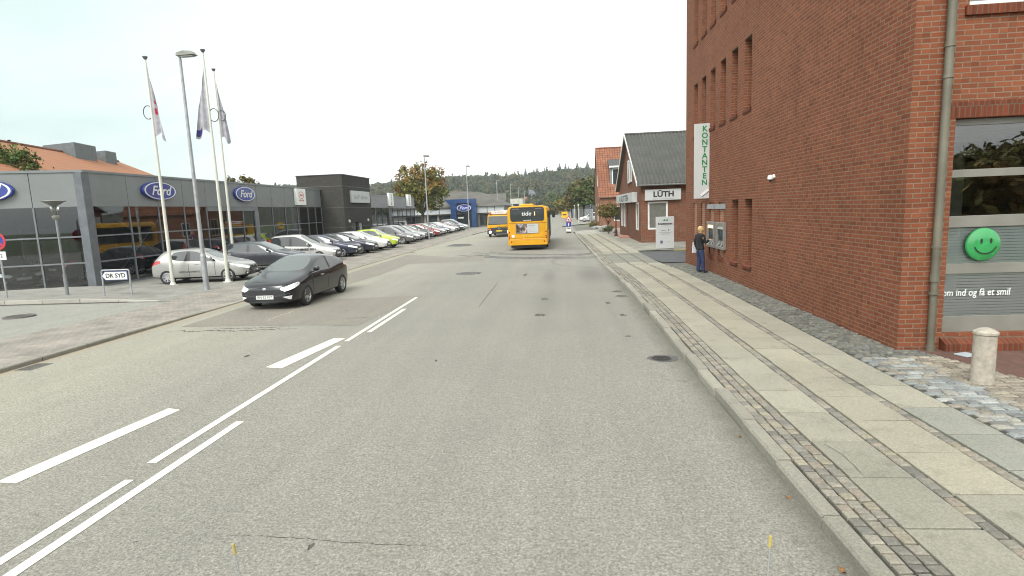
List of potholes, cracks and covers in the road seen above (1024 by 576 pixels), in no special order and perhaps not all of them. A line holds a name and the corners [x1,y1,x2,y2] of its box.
drain grate [14,363,53,371]
crack [216,535,435,547]
